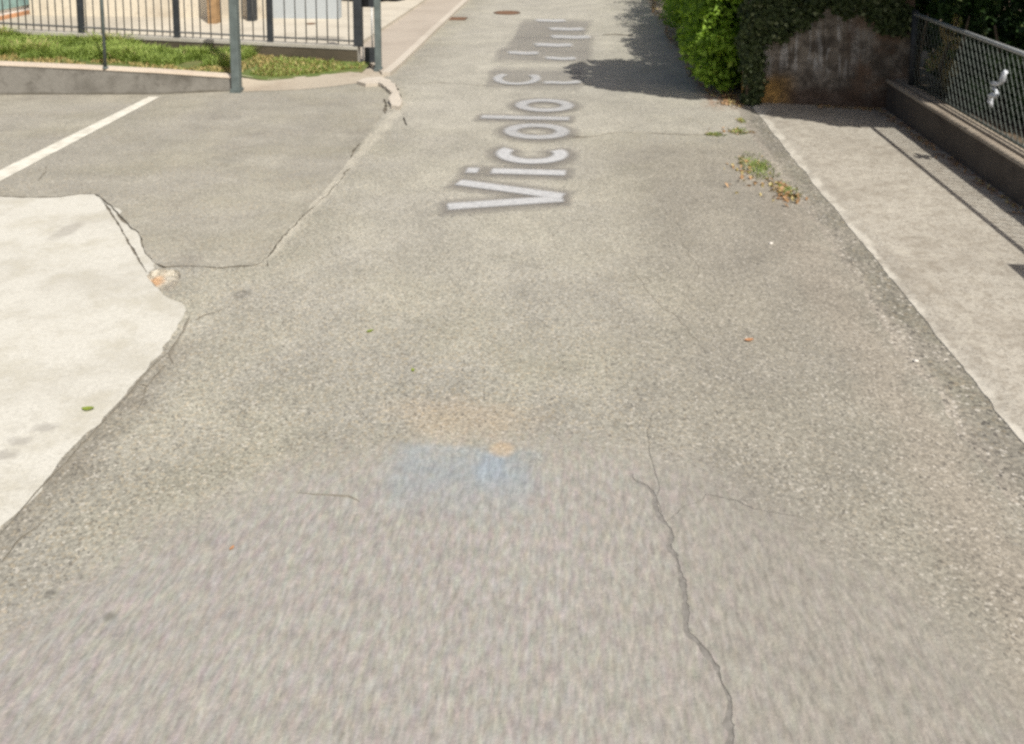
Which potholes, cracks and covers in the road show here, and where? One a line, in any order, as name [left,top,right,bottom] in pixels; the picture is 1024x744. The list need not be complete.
crack [635,211,706,352]
crack [305,493,360,502]
crack [632,416,808,744]
